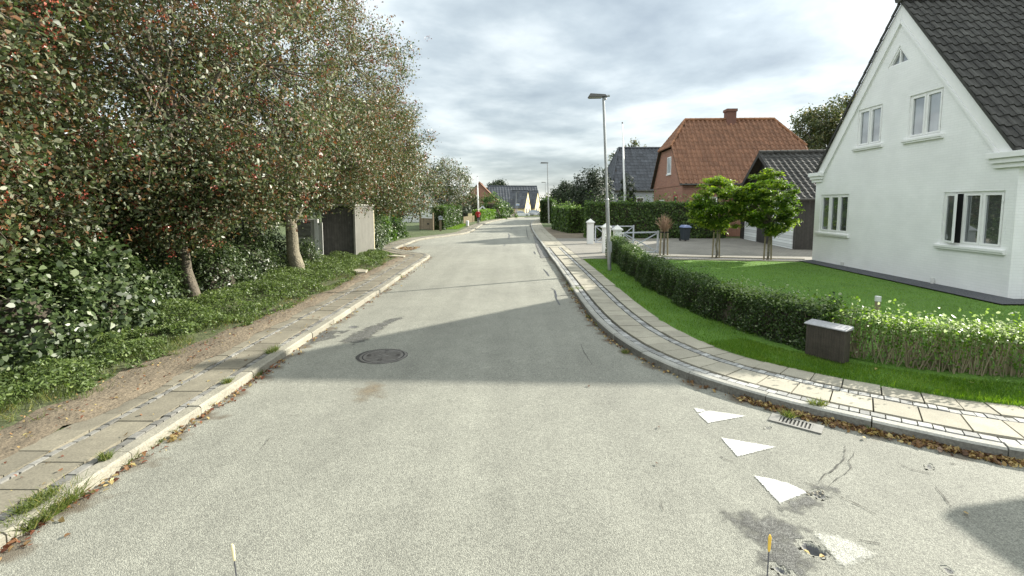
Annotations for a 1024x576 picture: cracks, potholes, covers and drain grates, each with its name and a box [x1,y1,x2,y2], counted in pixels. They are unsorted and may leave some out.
drain grate [768,413,824,434]
crack [800,446,875,514]
manhole cover [355,349,408,364]
pothole [798,542,830,559]
